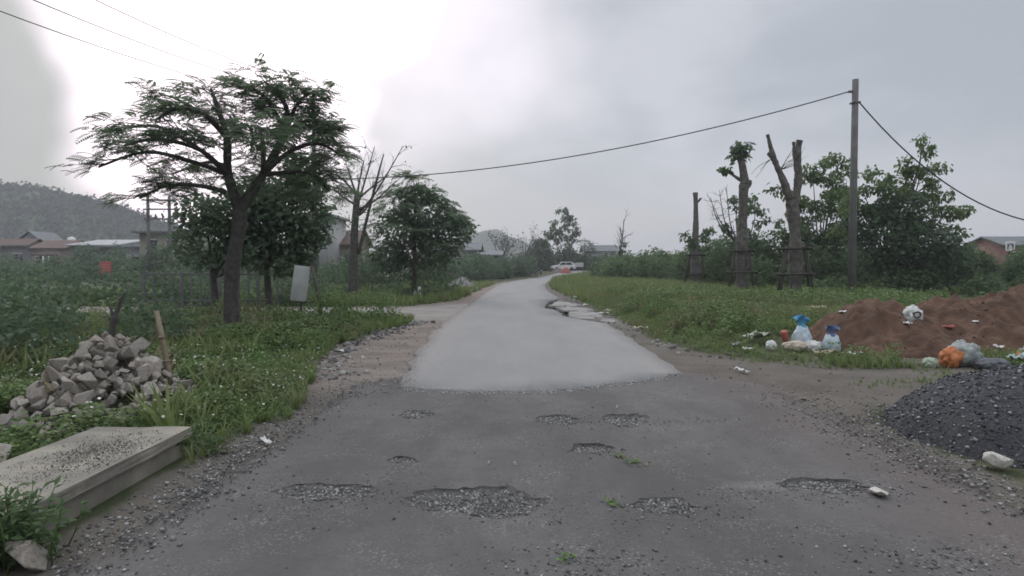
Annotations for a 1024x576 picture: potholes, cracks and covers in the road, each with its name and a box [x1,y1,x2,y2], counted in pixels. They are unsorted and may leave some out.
pothole [628,497,704,515]
pothole [776,477,874,495]
pothole [270,483,379,502]
pothole [535,414,581,426]
pothole [399,410,435,419]
pothole [402,485,548,519]
pothole [603,413,650,428]
pothole [569,443,616,454]
